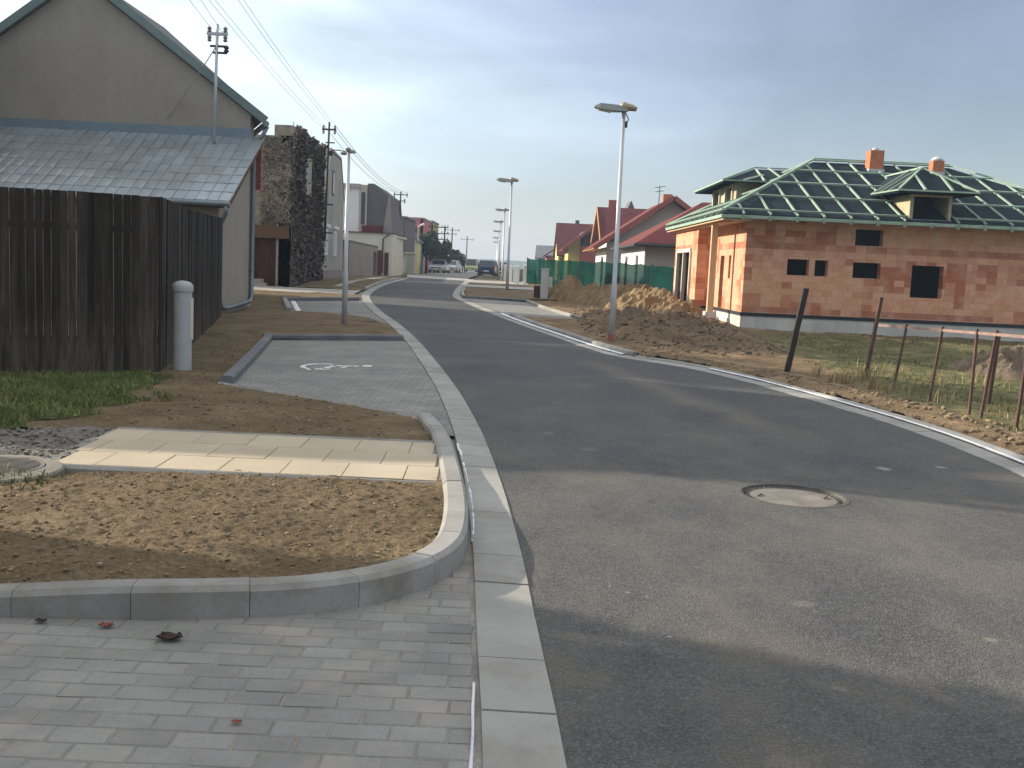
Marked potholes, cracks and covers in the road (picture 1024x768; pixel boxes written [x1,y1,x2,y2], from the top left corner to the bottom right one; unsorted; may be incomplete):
manhole cover [736,483,851,509]
manhole cover [0,455,65,484]
